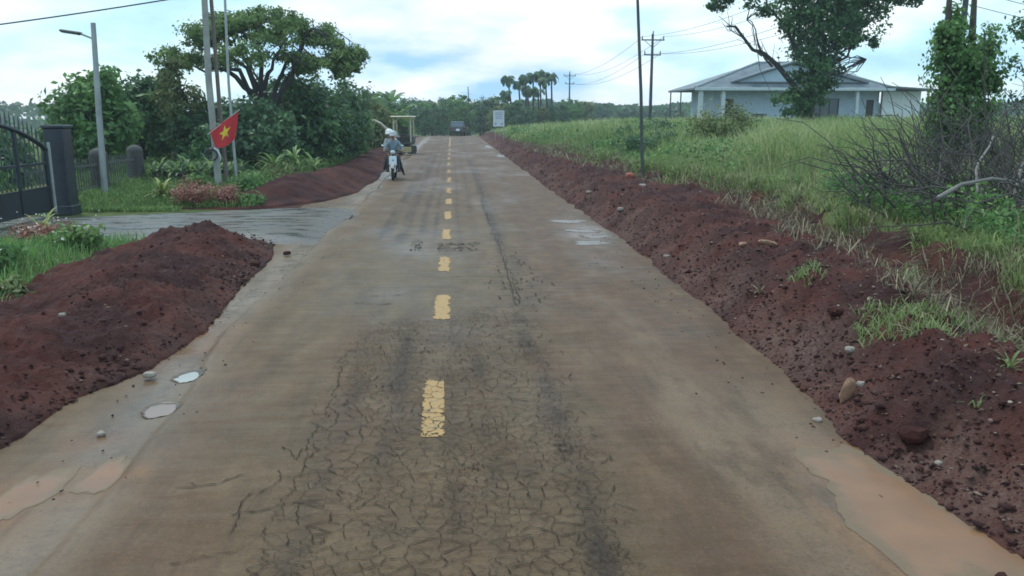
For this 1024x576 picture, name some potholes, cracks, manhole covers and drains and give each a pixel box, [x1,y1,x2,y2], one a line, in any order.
crack [168,307,643,576]
crack [410,190,557,307]
pothole [141,402,182,419]
pothole [172,368,206,383]
